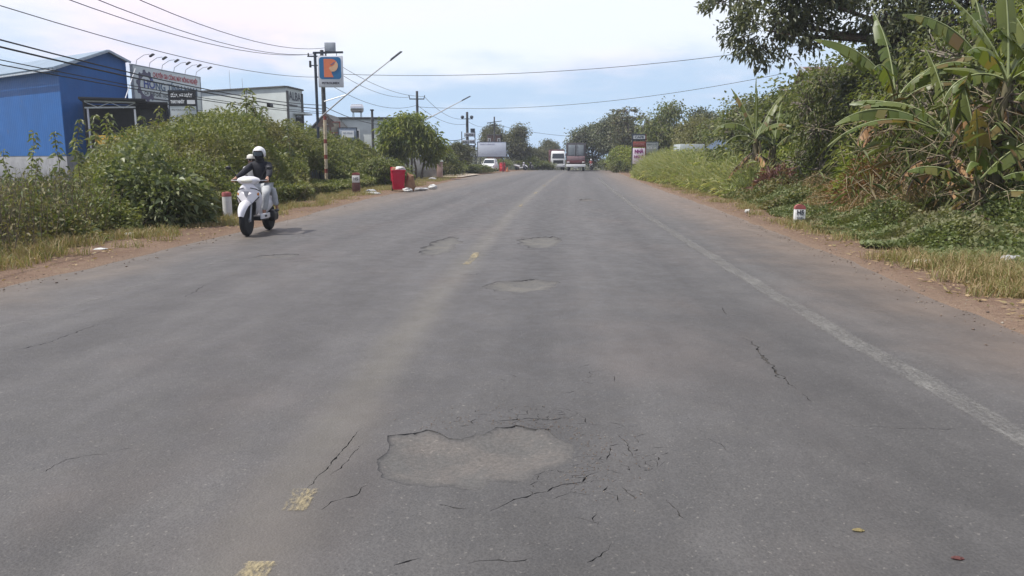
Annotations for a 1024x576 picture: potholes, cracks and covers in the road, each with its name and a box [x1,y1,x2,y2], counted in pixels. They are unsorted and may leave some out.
crack [722,308,958,430]
crack [445,365,727,525]
pothole [517,236,562,248]
pothole [377,425,574,491]
crack [395,544,611,565]
pothole [483,279,561,293]
crack [308,428,368,509]
pothole [418,237,463,255]
